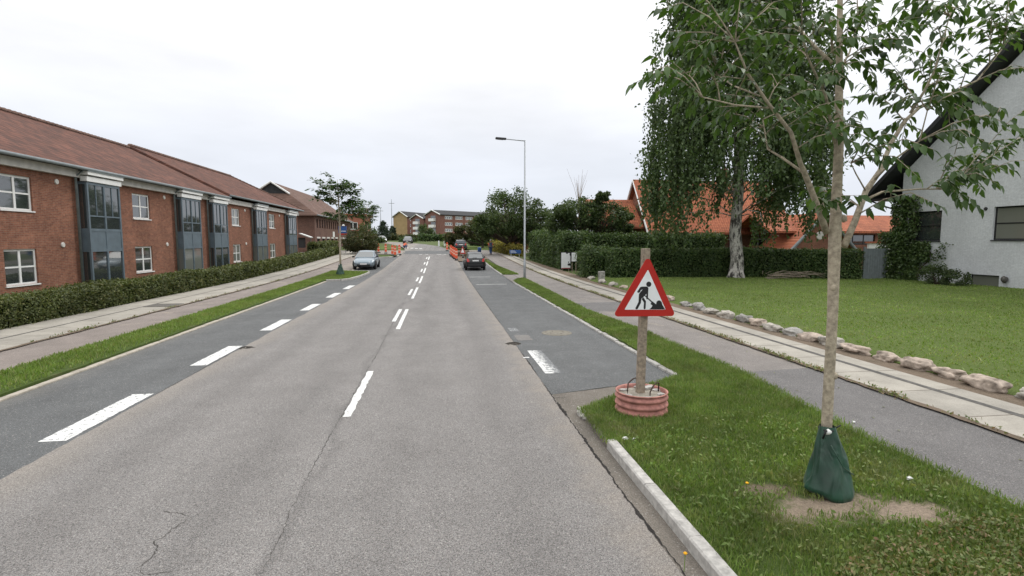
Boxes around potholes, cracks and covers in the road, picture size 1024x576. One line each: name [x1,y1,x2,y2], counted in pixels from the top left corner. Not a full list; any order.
crack [137,510,188,574]
crack [261,299,405,574]
